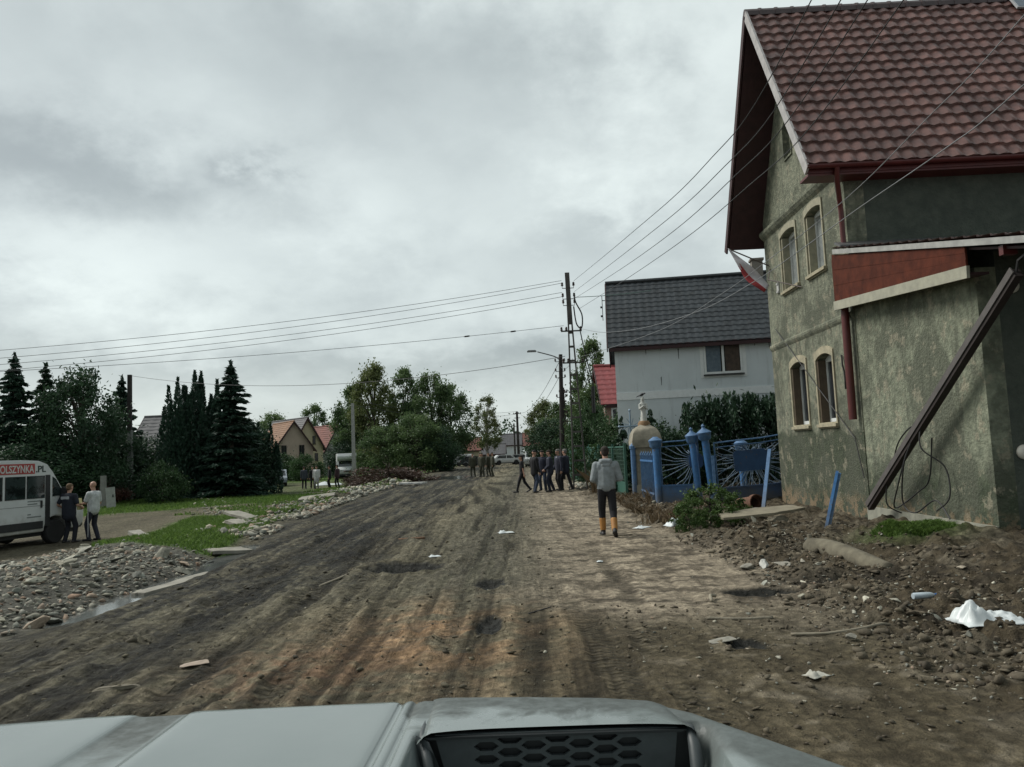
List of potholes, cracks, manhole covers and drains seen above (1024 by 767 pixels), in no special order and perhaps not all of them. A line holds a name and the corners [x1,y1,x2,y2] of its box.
pothole [717,636,776,651]
pothole [470,576,511,592]
pothole [349,558,457,576]
pothole [470,611,506,637]
